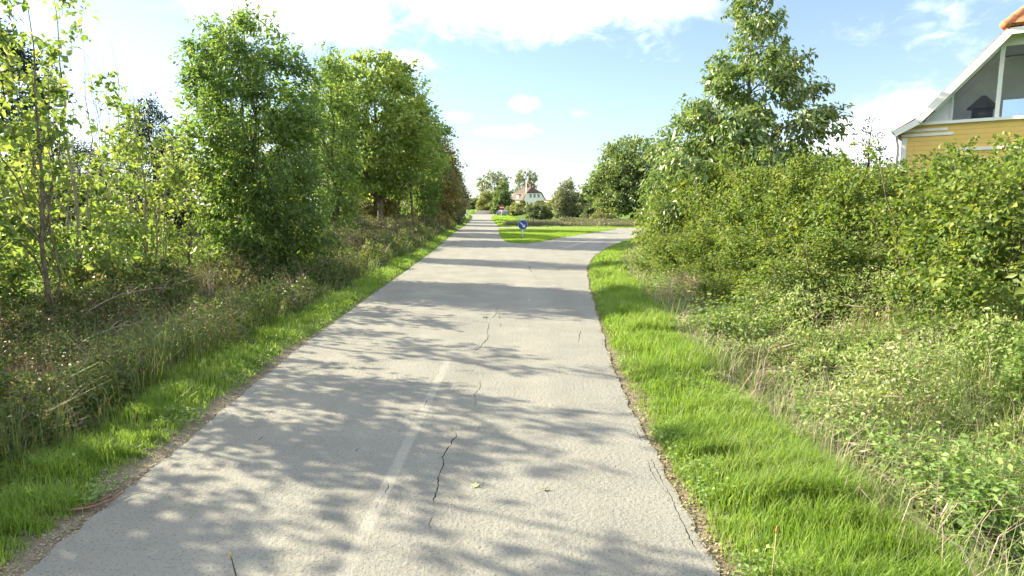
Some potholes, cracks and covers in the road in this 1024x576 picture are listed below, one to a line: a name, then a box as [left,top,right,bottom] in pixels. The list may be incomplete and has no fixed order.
crack [631,420,707,567]
crack [428,427,457,532]
